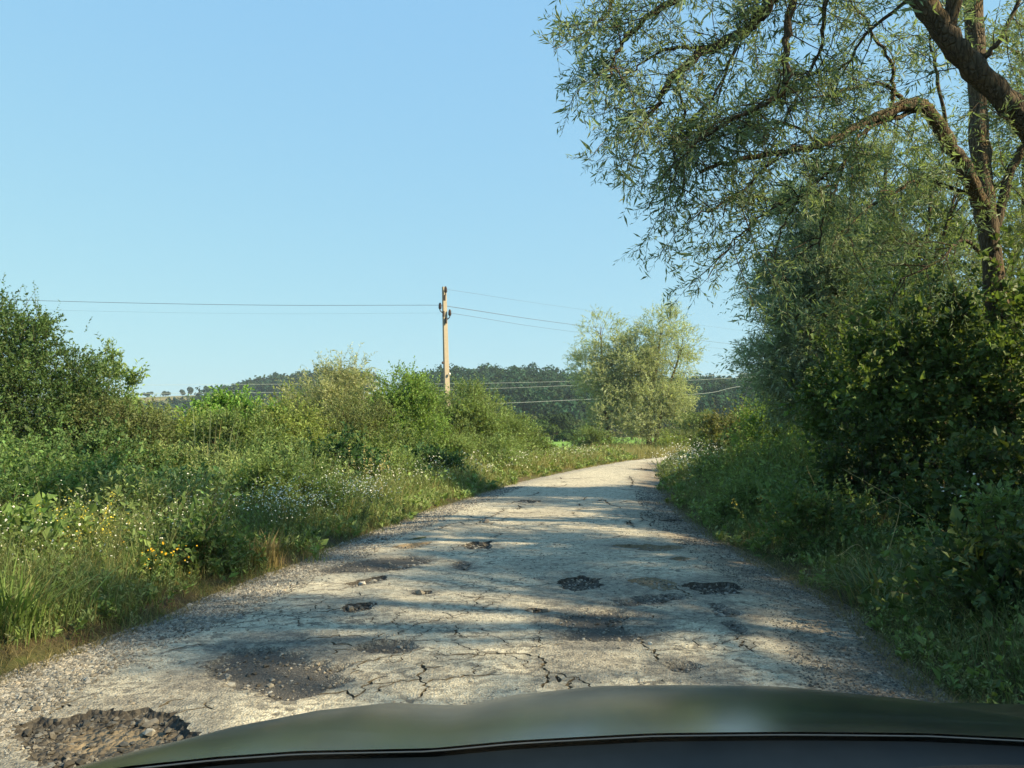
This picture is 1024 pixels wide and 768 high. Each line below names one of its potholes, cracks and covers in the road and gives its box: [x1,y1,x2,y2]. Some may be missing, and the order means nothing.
pothole [451,560,473,570]
pothole [557,575,604,591]
pothole [461,540,494,550]
pothole [596,593,687,606]
pothole [351,639,420,654]
pothole [661,661,706,673]
pothole [341,602,378,613]
pothole [9,707,202,768]
pothole [197,645,356,703]
crack [163,577,591,698]
